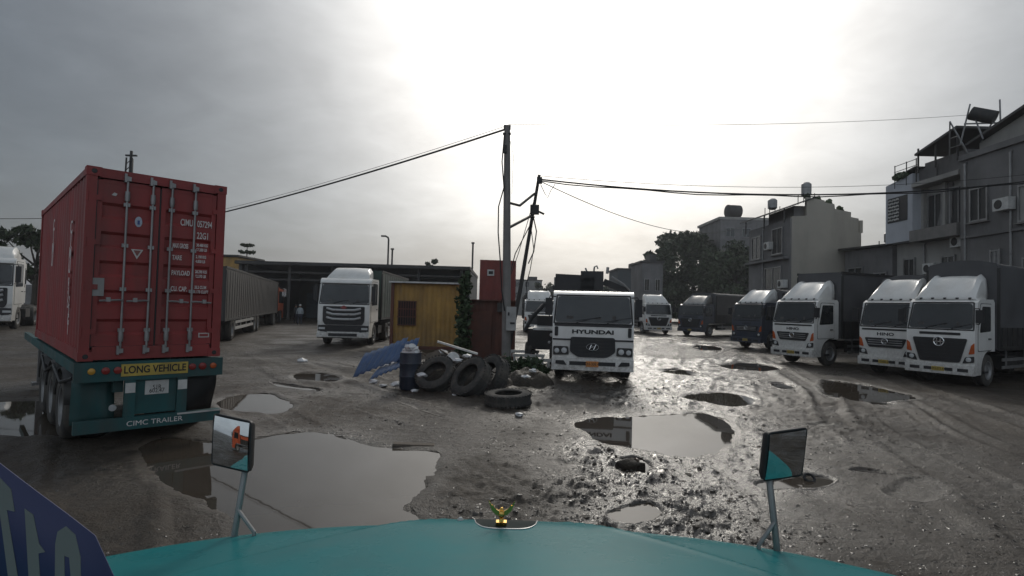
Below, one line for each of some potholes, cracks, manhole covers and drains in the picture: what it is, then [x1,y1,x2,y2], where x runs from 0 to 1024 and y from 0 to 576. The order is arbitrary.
pothole [715,361,786,372]
pothole [676,391,764,408]
pothole [286,370,346,382]
pothole [751,472,839,490]
pothole [619,455,654,473]
pothole [127,428,458,538]
pothole [211,391,306,415]
pothole [878,475,954,503]
pothole [562,410,751,462]
pothole [811,379,927,404]
pothole [601,497,668,525]
